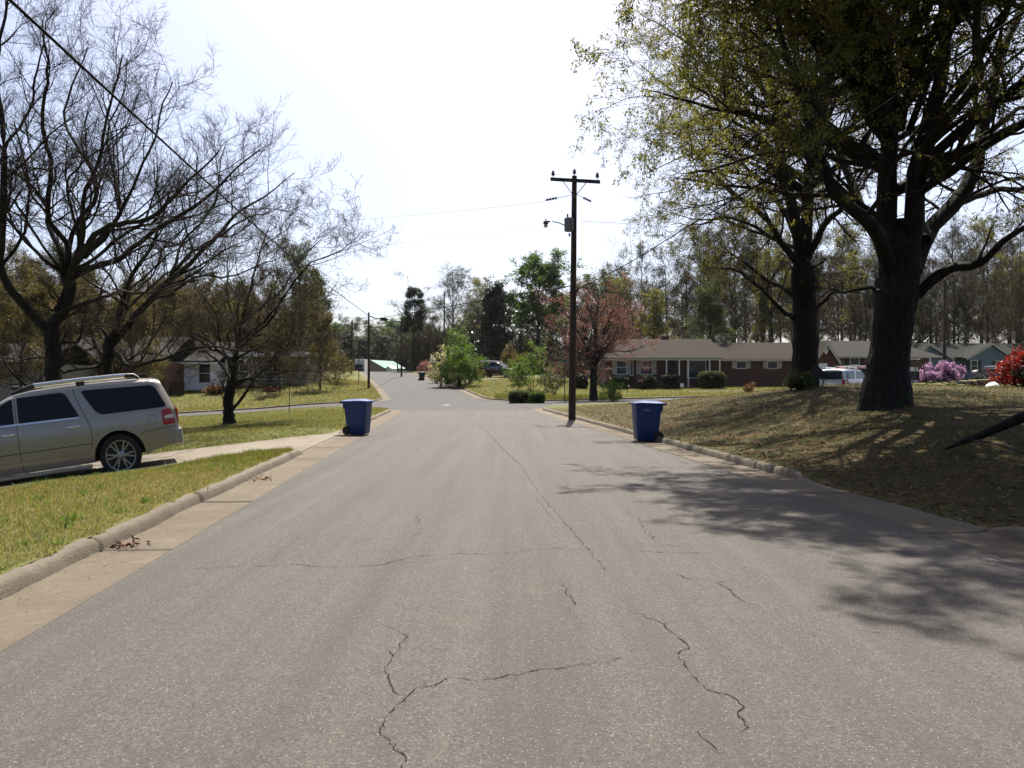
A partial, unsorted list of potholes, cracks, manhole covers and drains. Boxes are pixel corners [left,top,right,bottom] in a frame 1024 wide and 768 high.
crack [371,620,619,768]
crack [192,525,581,569]
crack [625,610,748,732]
